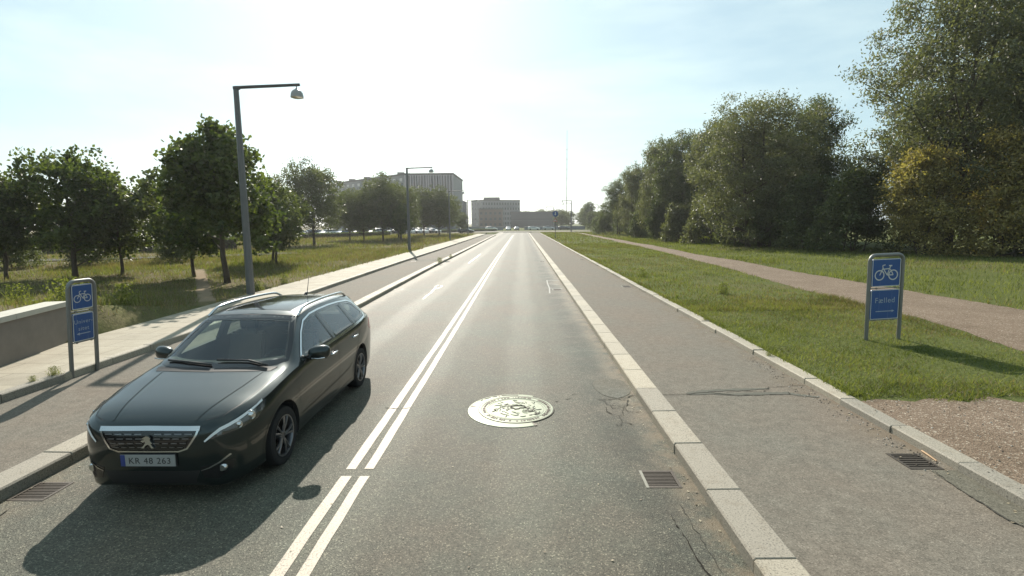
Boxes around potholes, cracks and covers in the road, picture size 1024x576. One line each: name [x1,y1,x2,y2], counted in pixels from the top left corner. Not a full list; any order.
crack [663,385,819,398]
crack [603,395,639,426]
crack [935,471,1024,527]
crack [672,506,722,576]
manhole cover [468,394,554,428]
drain grate [5,482,74,501]
drain grate [638,470,683,488]
drain grate [886,453,944,470]
